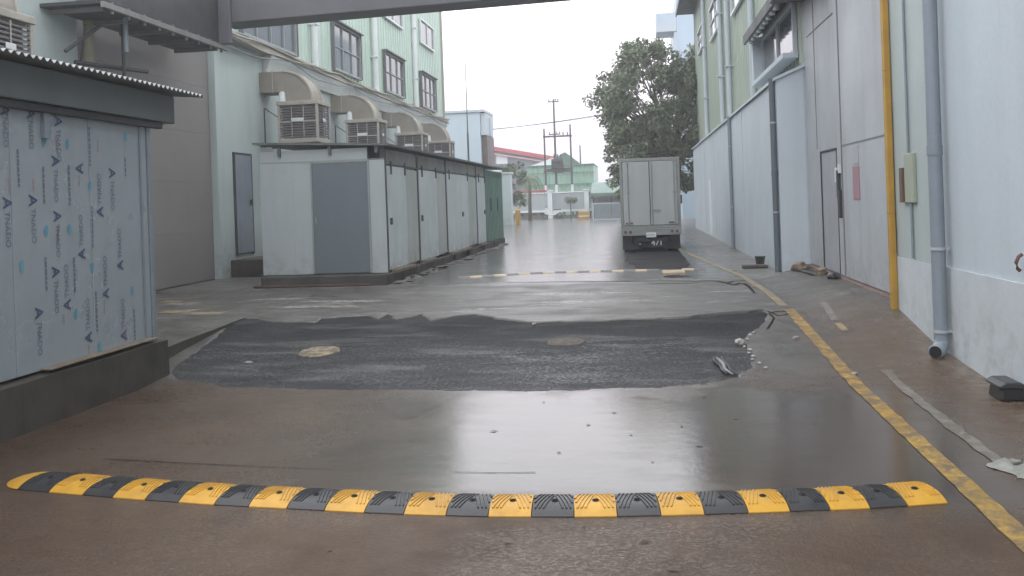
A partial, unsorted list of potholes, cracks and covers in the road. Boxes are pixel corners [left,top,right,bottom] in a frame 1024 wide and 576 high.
manhole cover [298,346,340,357]
manhole cover [548,337,587,346]
